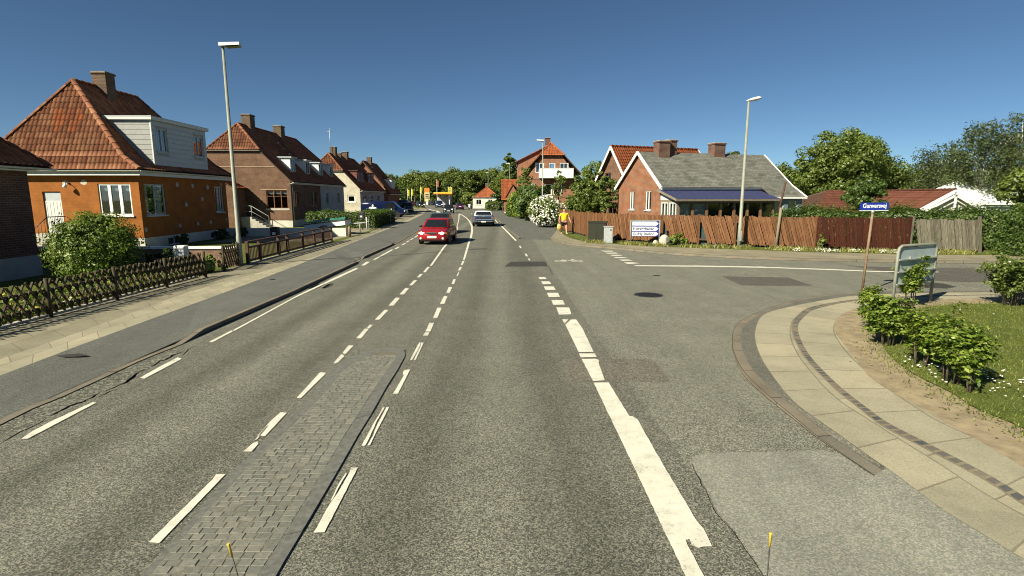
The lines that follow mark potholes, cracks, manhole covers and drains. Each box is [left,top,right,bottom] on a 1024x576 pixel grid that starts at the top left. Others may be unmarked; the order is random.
crack [3,347,192,442]
